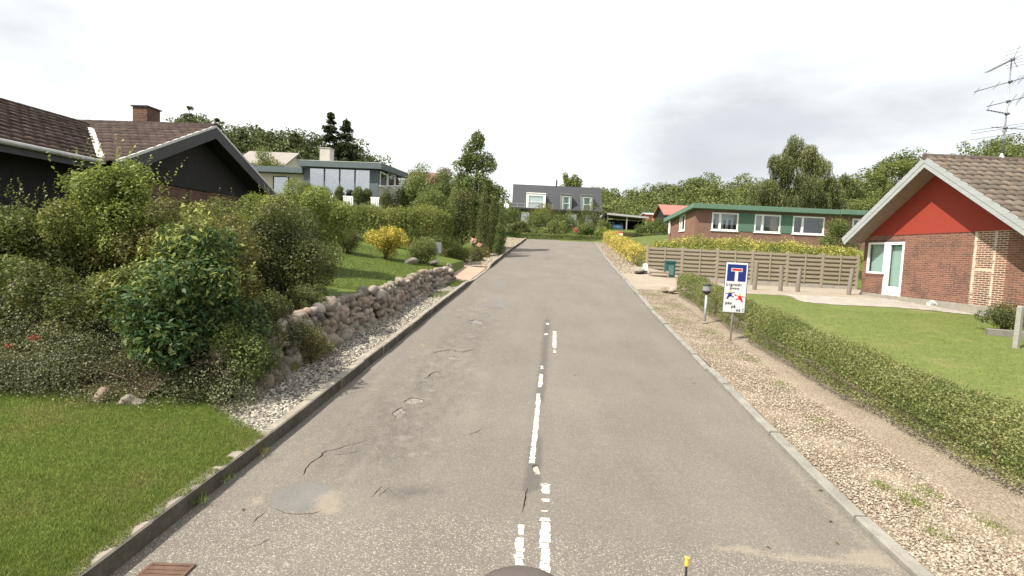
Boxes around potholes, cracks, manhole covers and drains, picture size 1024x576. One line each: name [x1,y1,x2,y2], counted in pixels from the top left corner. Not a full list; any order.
crack [303,440,367,475]
